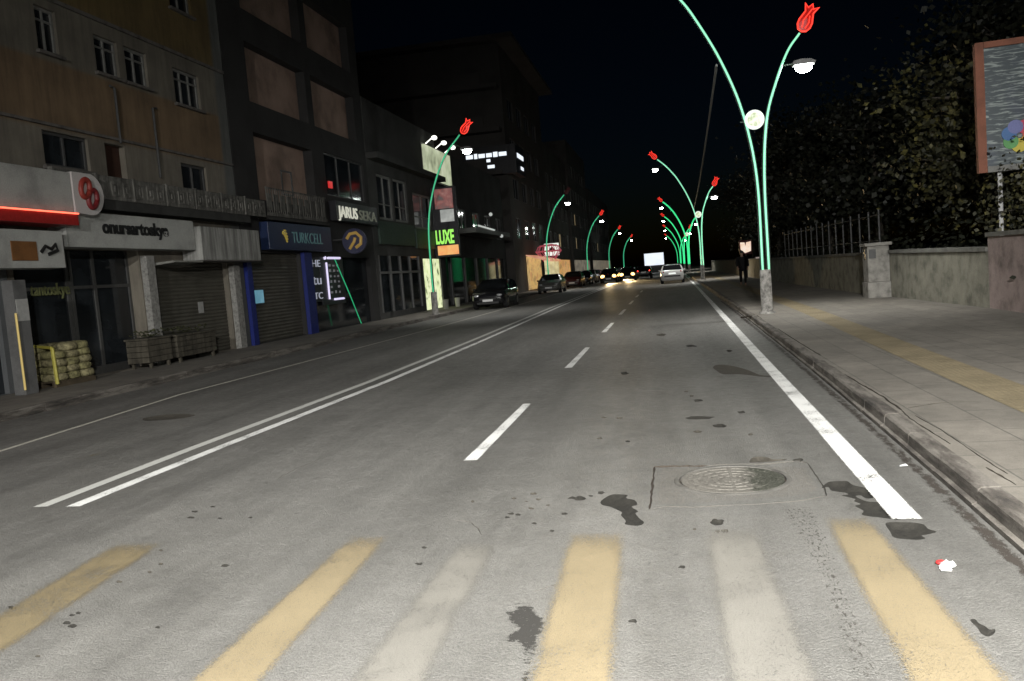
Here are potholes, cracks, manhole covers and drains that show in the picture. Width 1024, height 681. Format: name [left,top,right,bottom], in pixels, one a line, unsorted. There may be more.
manhole cover [674,465,792,495]
